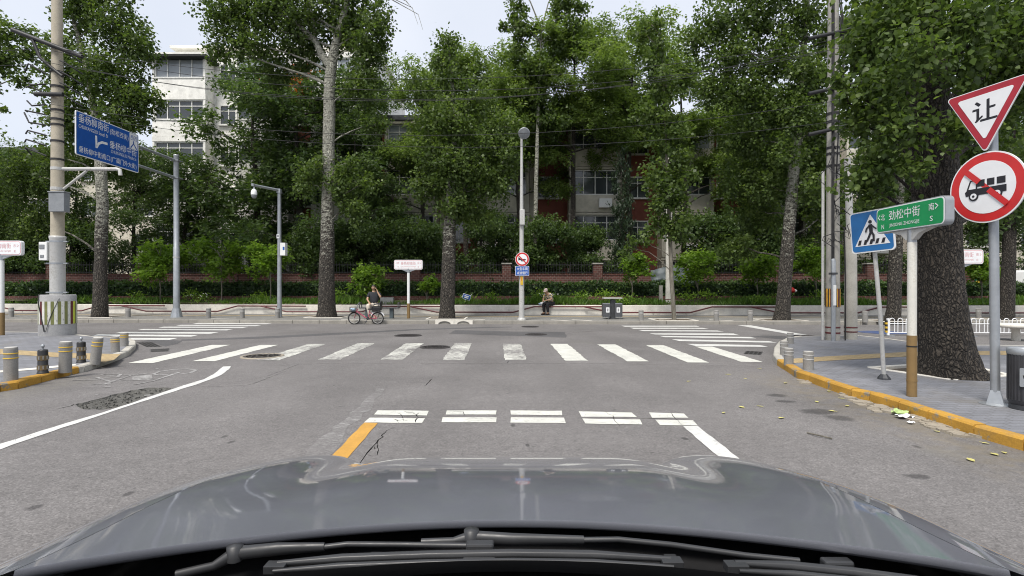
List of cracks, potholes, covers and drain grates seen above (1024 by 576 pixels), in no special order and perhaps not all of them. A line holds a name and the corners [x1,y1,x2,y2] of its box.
pothole [75,387,171,410]
crack [360,414,427,463]
